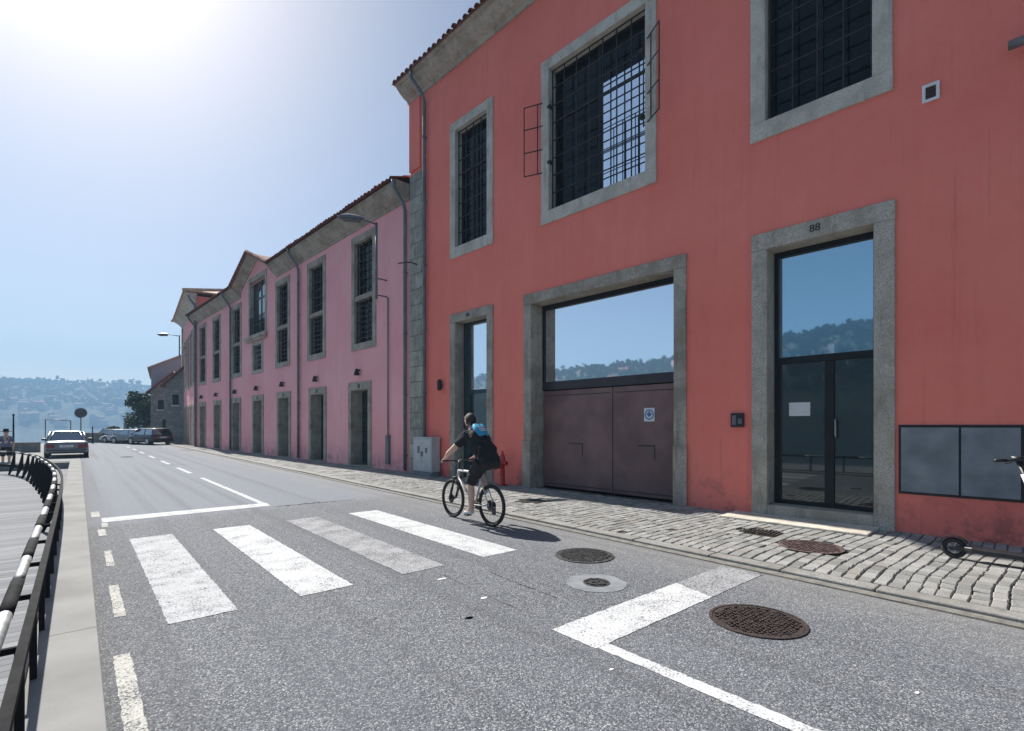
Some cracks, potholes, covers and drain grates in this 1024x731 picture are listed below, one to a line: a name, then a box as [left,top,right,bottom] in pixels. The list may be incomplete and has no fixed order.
manhole cover [555,548,614,564]
manhole cover [778,540,845,554]
manhole cover [709,604,809,640]
manhole cover [567,574,627,593]
